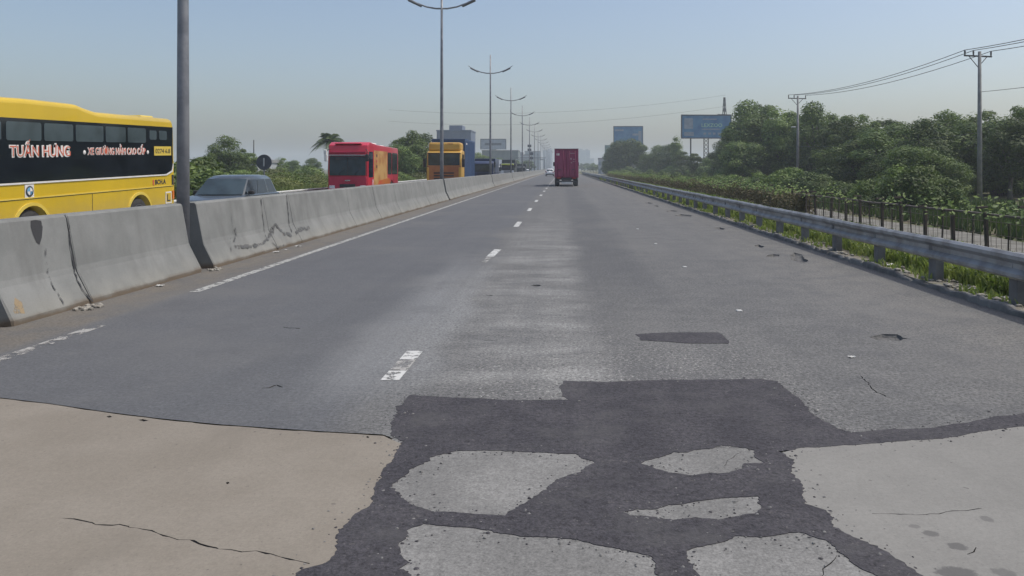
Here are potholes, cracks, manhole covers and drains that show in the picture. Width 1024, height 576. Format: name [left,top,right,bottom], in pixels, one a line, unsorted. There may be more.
crack [65,518,310,564]
pothole [790,253,808,264]
